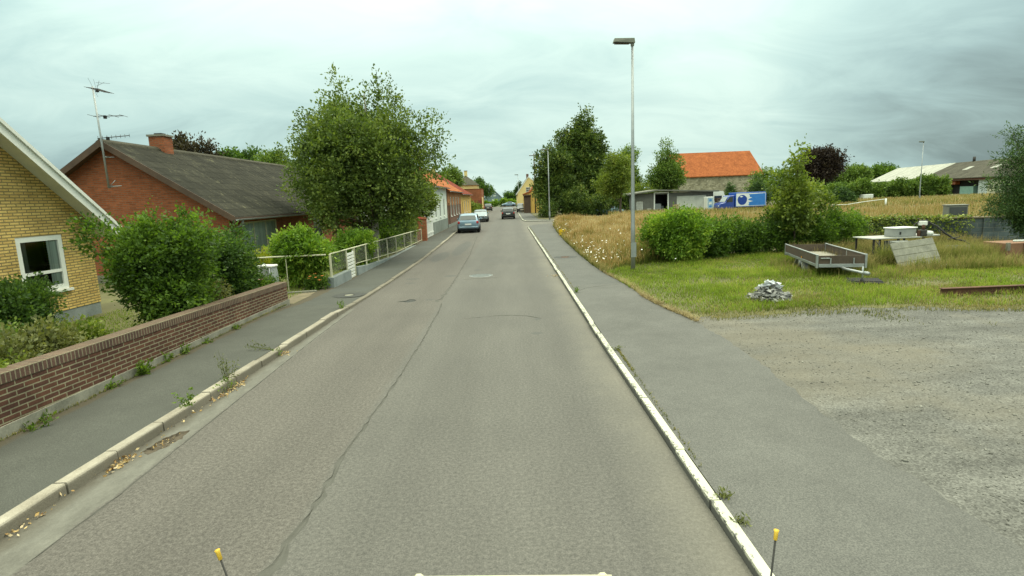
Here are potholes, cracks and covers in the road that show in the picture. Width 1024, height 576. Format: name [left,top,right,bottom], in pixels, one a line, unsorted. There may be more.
pothole [142,430,190,455]
